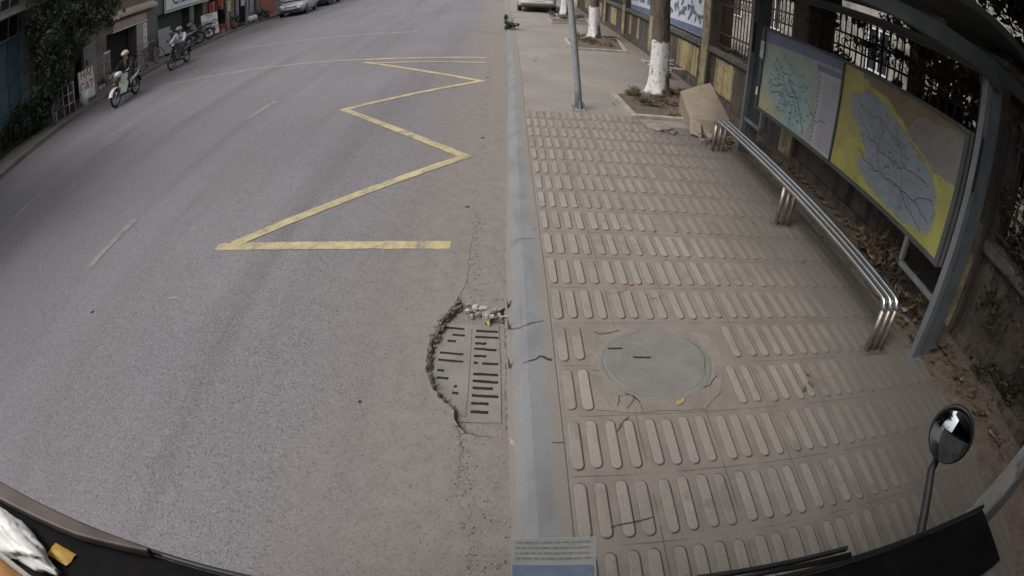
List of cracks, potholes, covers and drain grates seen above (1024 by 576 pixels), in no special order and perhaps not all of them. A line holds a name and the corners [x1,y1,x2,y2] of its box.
drain grate [431,323,501,423]
manhole cover [590,328,724,413]
crack [596,370,643,431]
crack [611,517,654,528]
